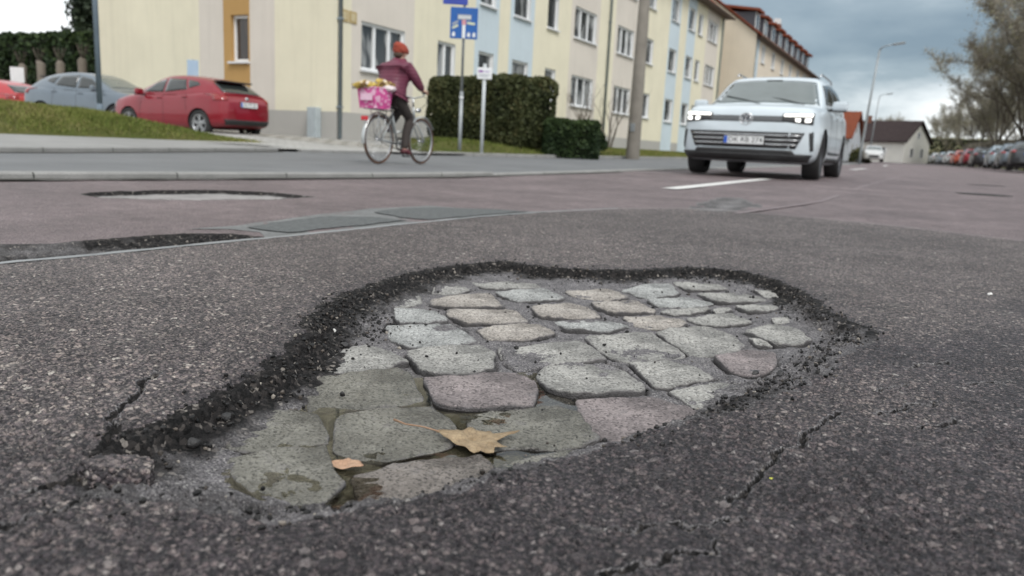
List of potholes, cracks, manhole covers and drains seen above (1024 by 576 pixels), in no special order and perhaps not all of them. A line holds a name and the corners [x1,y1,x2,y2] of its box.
crack [873,360,1007,431]
crack [0,370,163,532]
pothole [66,260,881,530]
crack [572,410,843,576]
